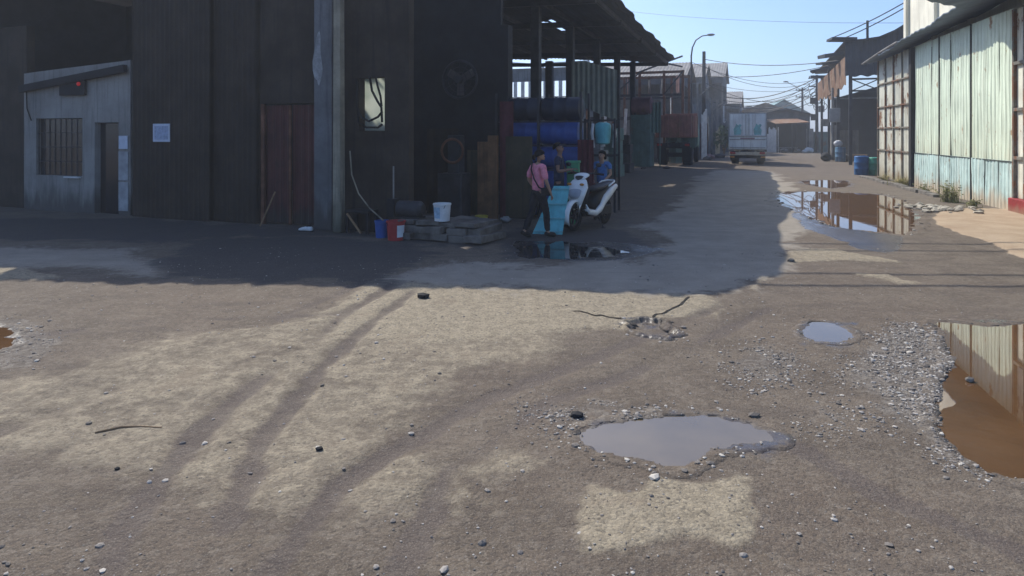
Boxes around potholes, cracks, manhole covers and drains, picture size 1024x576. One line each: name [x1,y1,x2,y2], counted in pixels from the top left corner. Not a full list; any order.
pothole [791,318,865,346]
pothole [910,318,1024,490]
pothole [0,322,32,353]
pothole [563,407,796,479]
pothole [618,316,688,341]
pothole [793,180,858,189]
pothole [764,190,933,236]
